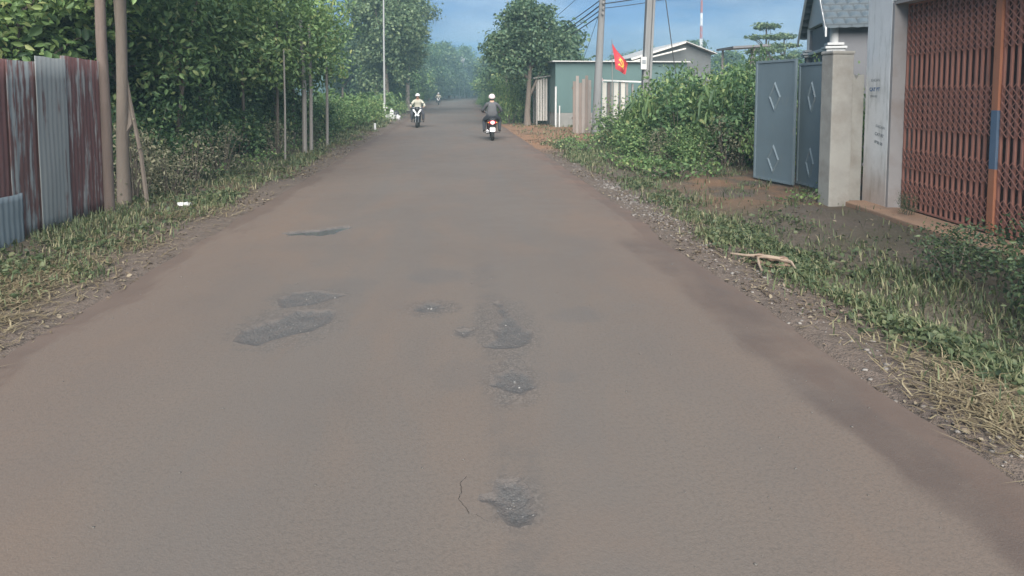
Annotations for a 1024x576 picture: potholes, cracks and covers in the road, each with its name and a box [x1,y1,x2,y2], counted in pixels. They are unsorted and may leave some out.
pothole [282,226,352,236]
pothole [233,309,338,346]
pothole [277,290,349,308]
pothole [477,477,538,528]
pothole [455,328,474,337]
pothole [488,367,538,395]
pothole [482,300,534,349]
pothole [413,302,446,313]
